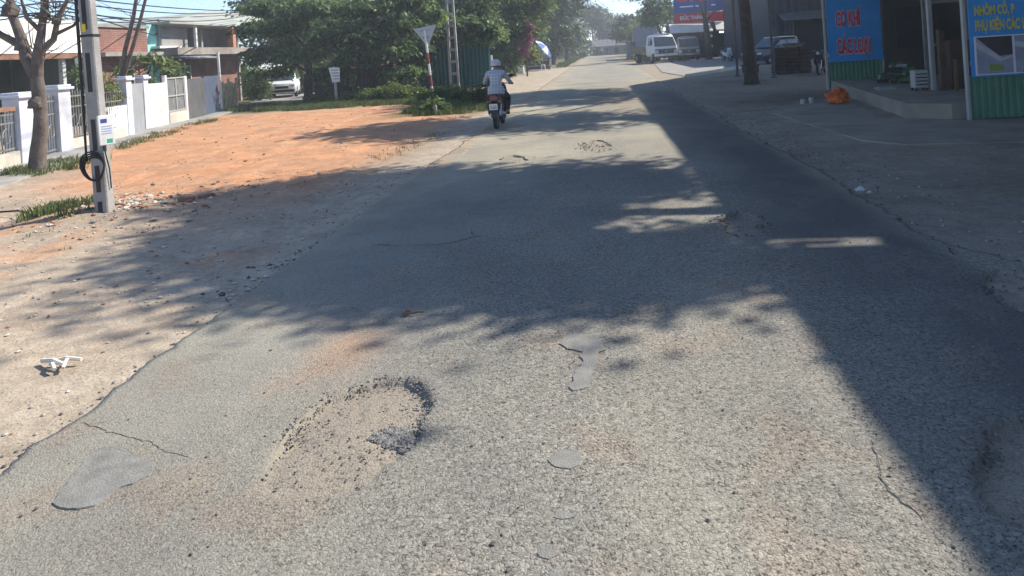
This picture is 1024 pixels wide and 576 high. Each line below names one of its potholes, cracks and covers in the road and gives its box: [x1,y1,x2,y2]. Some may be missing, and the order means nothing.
crack [946,246,961,259]
crack [85,423,187,457]
pothole [566,139,627,154]
crack [372,232,483,247]
crack [871,439,923,520]
pothole [234,368,453,518]
